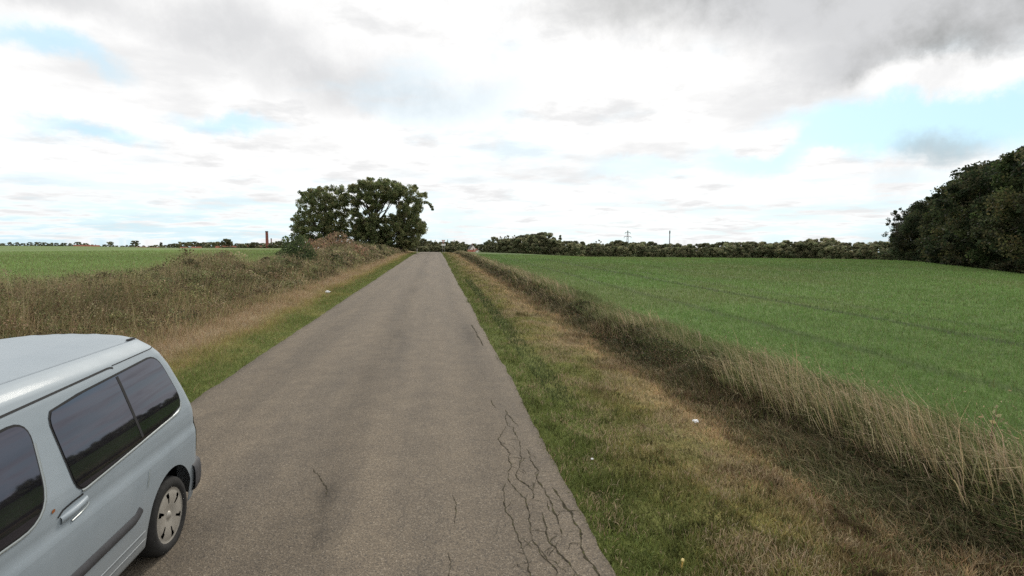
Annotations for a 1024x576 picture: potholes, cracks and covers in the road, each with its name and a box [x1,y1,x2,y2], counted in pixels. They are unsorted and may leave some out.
crack [494,414,600,576]
